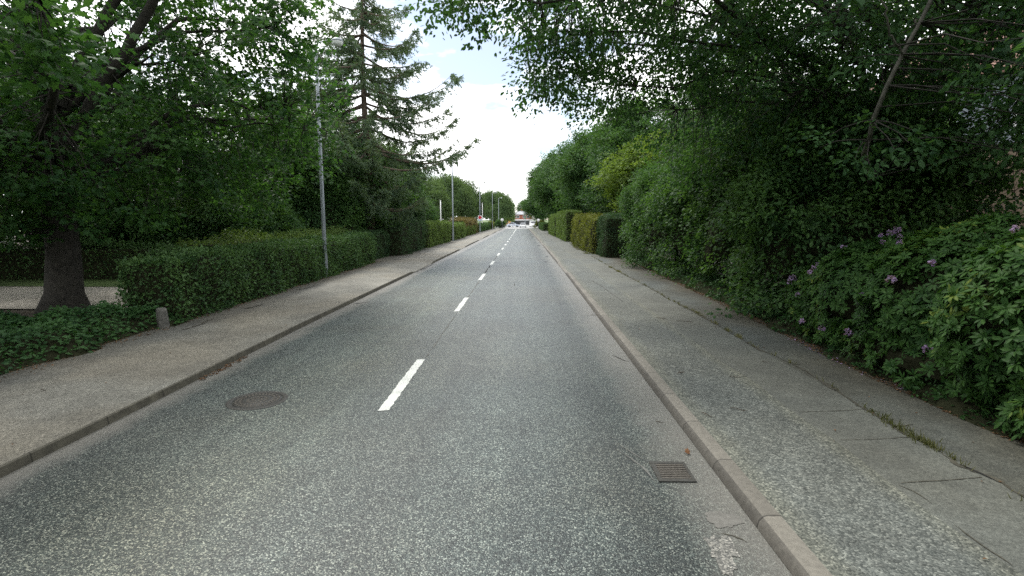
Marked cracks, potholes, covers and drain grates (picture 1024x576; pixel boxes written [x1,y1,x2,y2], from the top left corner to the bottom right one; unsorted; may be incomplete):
drain grate [649,461,697,482]
manhole cover [225,391,288,410]
